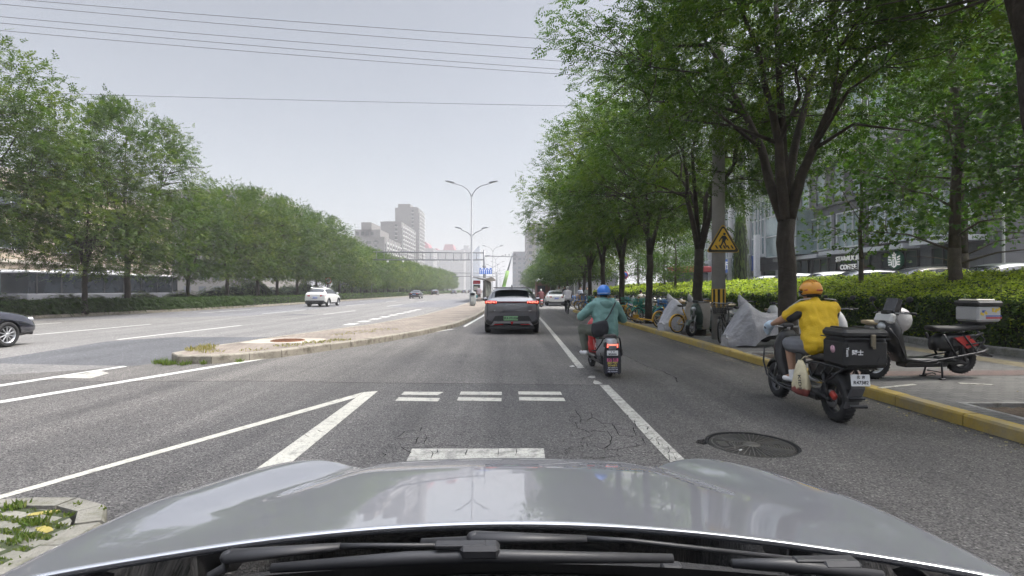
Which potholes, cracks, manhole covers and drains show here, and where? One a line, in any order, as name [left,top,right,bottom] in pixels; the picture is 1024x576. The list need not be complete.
crack [370,424,517,460]
crack [557,409,678,460]
manhole cover [705,432,802,458]
